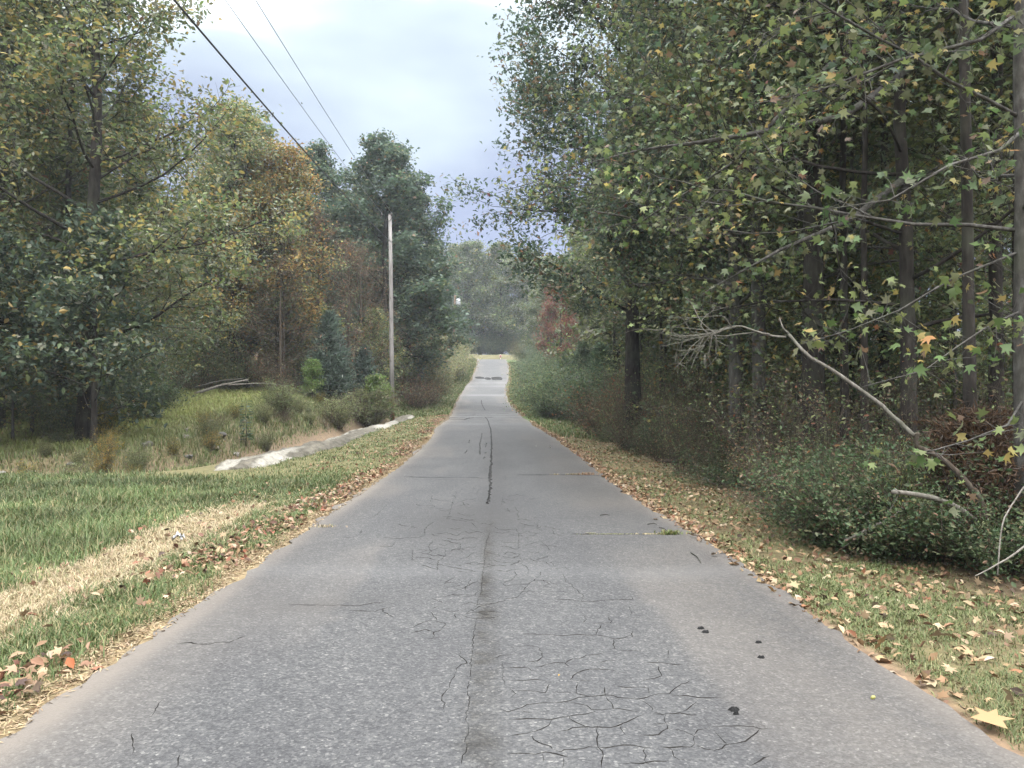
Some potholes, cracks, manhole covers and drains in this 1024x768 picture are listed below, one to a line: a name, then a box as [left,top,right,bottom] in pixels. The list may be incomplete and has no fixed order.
crack [299,602,393,617]
crack [496,616,769,767]
crack [344,474,633,763]
